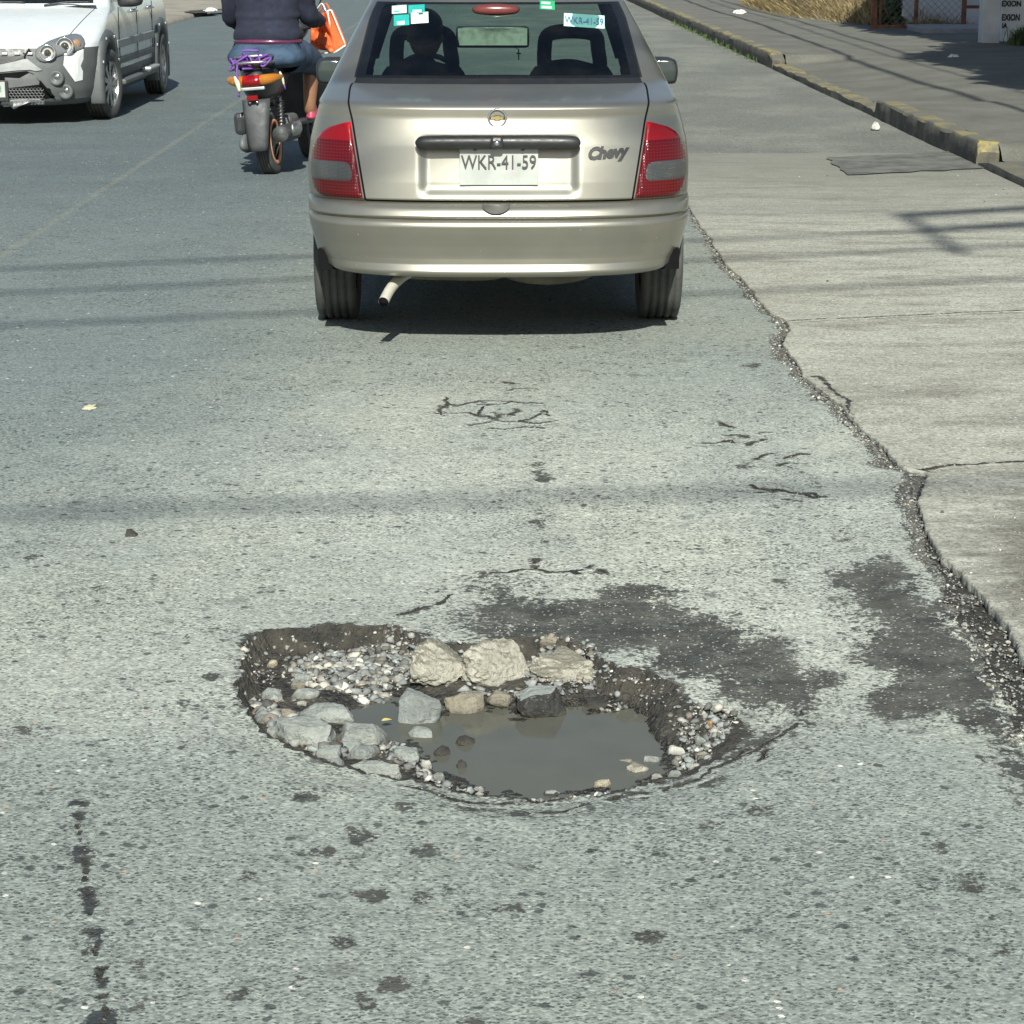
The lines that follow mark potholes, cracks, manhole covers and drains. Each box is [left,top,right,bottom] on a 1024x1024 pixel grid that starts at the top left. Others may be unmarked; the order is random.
crack [688,209,1024,748]
pothole [233,624,752,803]
crack [425,380,566,431]
crack [62,798,122,1024]
crack [386,557,619,620]
